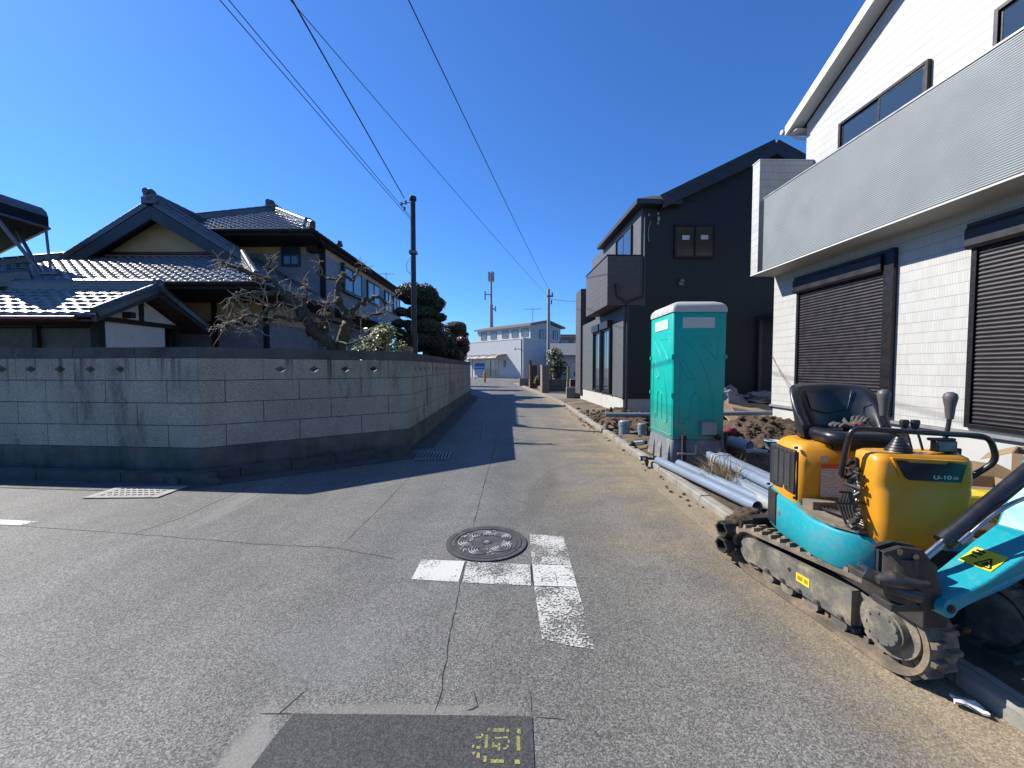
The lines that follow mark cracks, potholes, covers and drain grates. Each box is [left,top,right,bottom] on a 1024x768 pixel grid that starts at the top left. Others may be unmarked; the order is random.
crack [434,563,466,712]
manhole cover [446,526,526,562]
drain grate [414,451,451,460]
